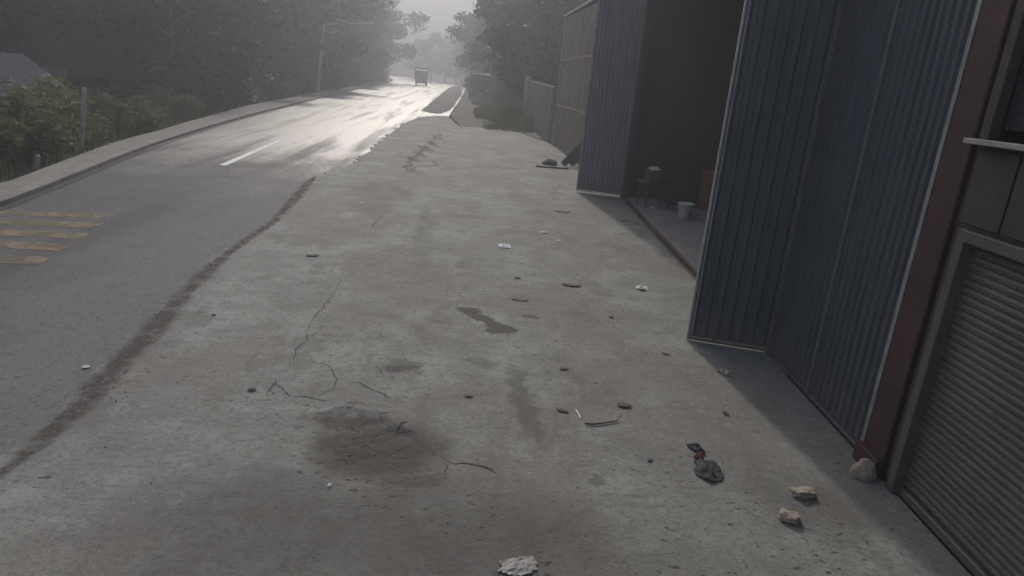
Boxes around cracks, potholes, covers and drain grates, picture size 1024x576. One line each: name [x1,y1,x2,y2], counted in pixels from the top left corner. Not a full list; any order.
crack [439,456,496,474]
crack [265,278,390,405]
crack [389,133,546,174]
